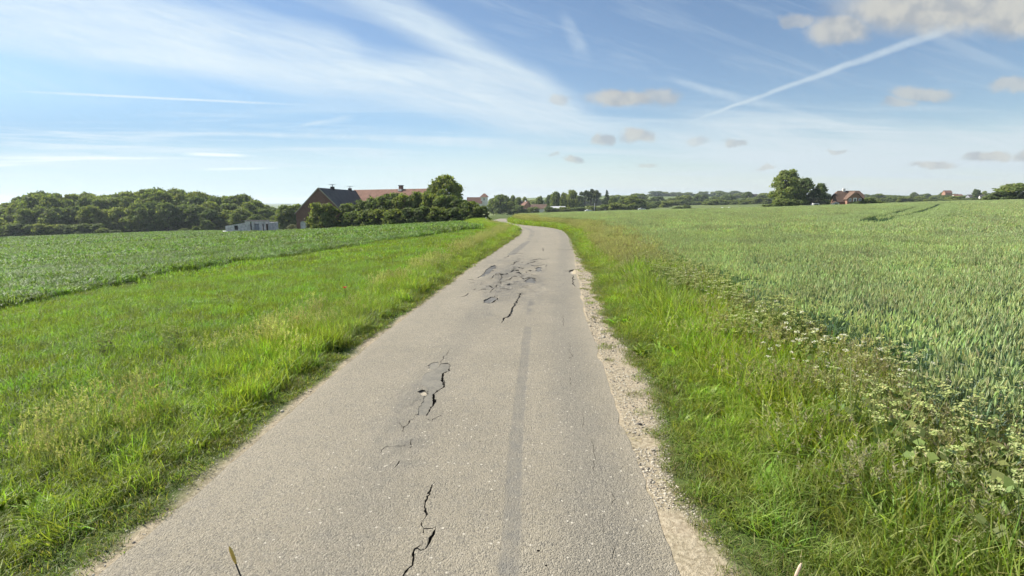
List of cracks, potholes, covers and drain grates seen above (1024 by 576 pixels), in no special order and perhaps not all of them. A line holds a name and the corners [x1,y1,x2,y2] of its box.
crack [403,484,436,576]
crack [462,248,547,322]
